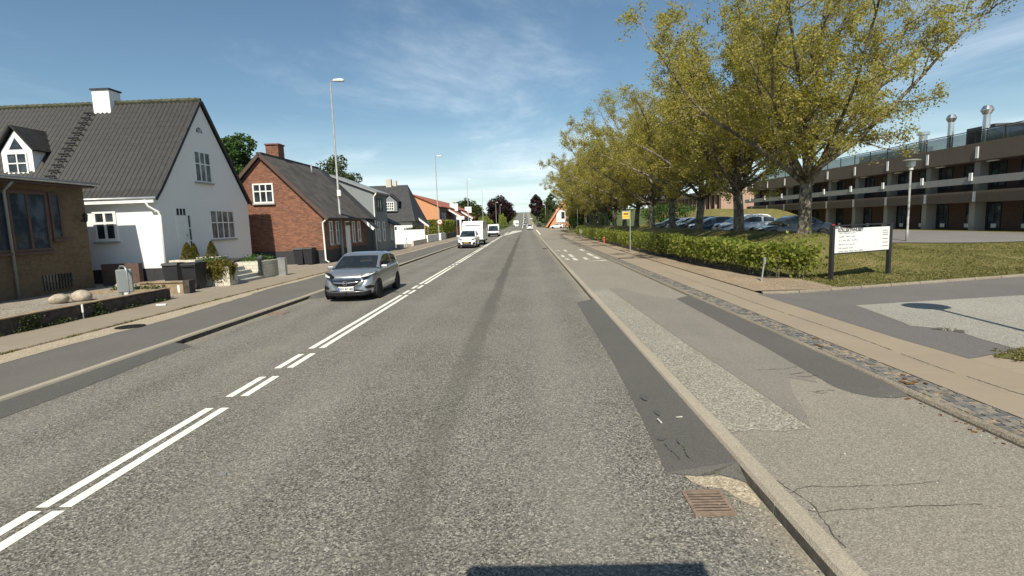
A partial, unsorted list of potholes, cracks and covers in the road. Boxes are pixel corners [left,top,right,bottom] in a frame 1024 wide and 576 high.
drain grate [681,489,738,517]
crack [777,480,981,547]
